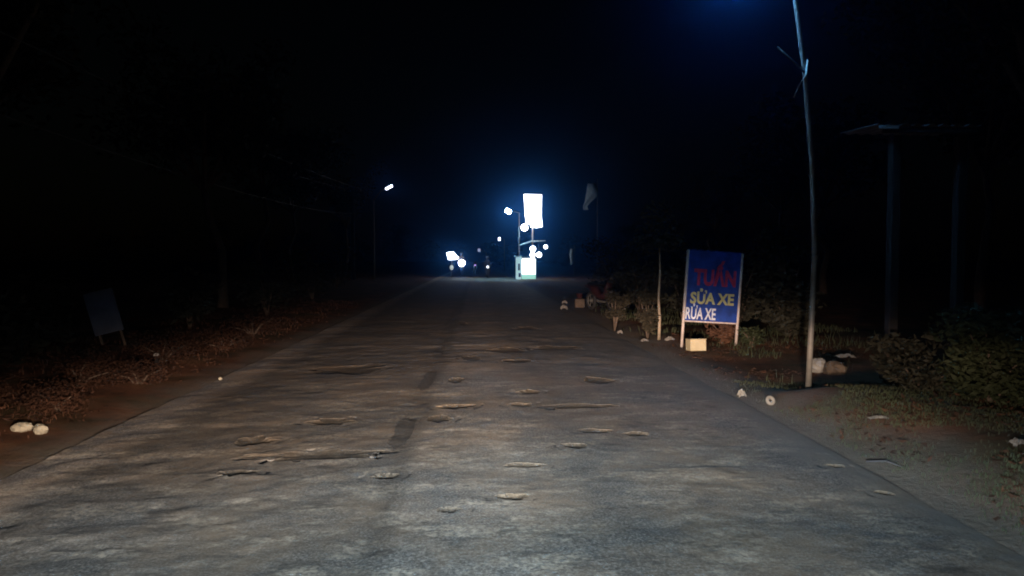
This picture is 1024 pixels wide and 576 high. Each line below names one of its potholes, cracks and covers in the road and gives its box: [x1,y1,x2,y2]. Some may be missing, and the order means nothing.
pothole [500,400,538,410]
pothole [443,376,469,386]
pothole [494,458,556,473]
pothole [482,345,530,355]
pothole [579,375,620,386]
pothole [296,415,363,429]
pothole [484,488,539,506]
pothole [533,400,626,411]
pothole [571,425,618,437]
pothole [510,387,546,397]
pothole [552,439,596,453]
pothole [860,485,909,501]
